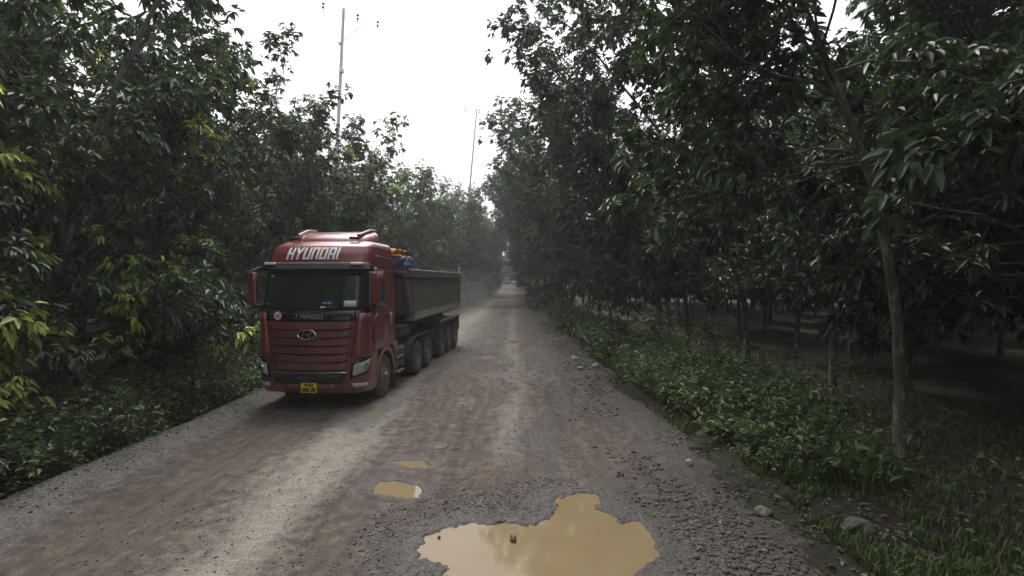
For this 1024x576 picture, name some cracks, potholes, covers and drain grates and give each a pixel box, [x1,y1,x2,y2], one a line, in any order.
pothole [379,484,693,576]
pothole [381,456,443,472]
pothole [359,475,436,504]
pothole [427,441,449,450]
